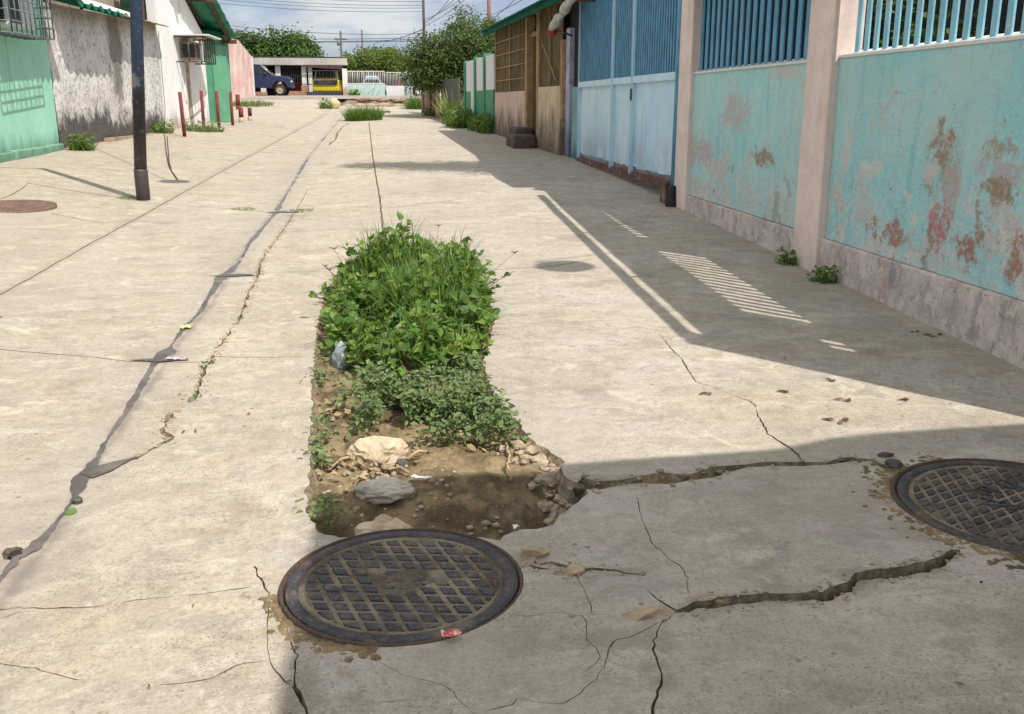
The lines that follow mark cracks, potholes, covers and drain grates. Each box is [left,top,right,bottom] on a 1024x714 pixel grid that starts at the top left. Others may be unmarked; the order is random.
pothole [304,258,589,540]
manhole cover [847,452,1024,569]
manhole cover [0,200,57,214]
crack [366,334,965,714]
crack [0,566,308,714]
manhole cover [258,528,524,663]
